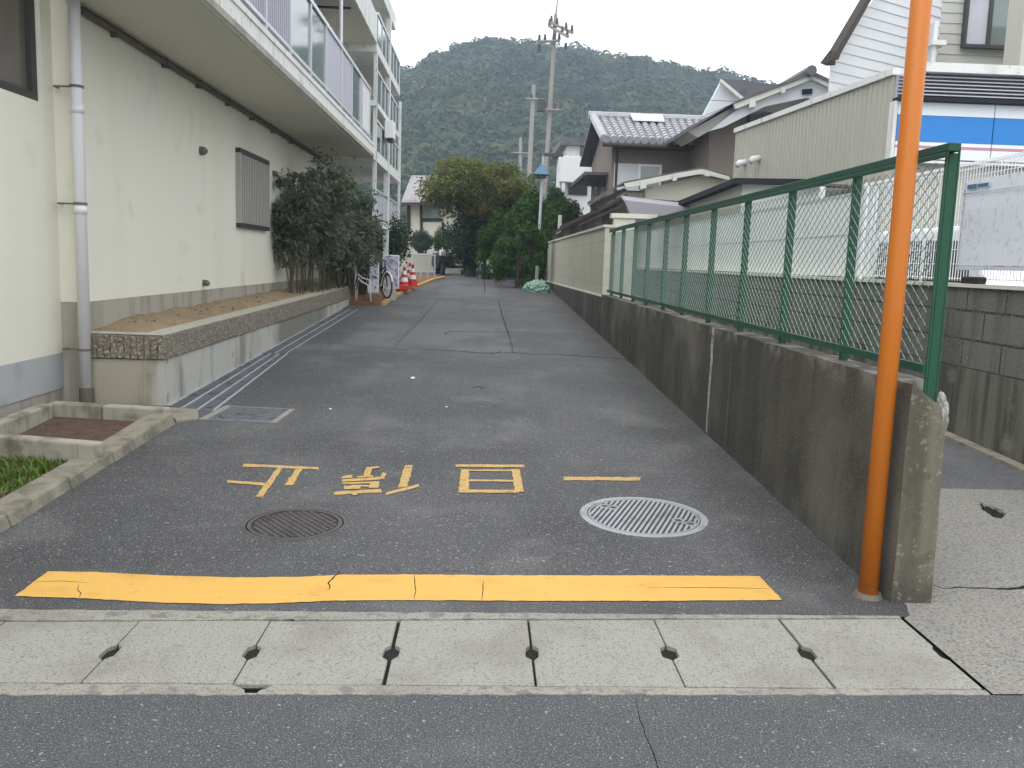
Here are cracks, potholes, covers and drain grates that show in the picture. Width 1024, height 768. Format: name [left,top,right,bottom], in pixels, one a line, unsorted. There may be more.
manhole cover [580,497,708,538]
pothole [978,501,1006,519]
manhole cover [242,508,347,541]
crack [636,700,658,768]
drain grate [199,405,295,423]
